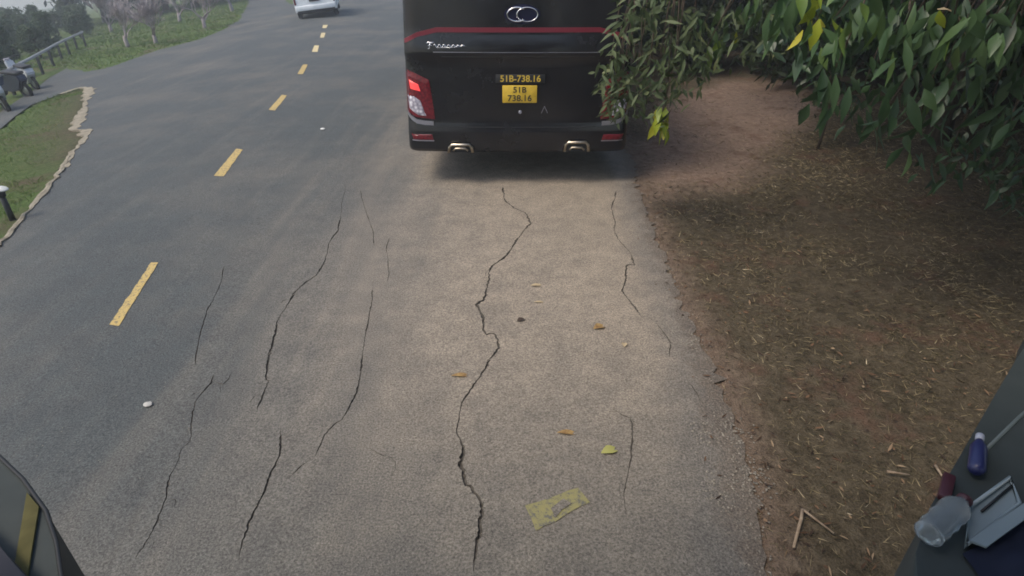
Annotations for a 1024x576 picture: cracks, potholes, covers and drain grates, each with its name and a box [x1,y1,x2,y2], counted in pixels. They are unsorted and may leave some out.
crack [611,407,634,517]
crack [456,188,532,571]
crack [239,190,390,555]
crack [611,192,672,356]
crack [136,268,231,557]
